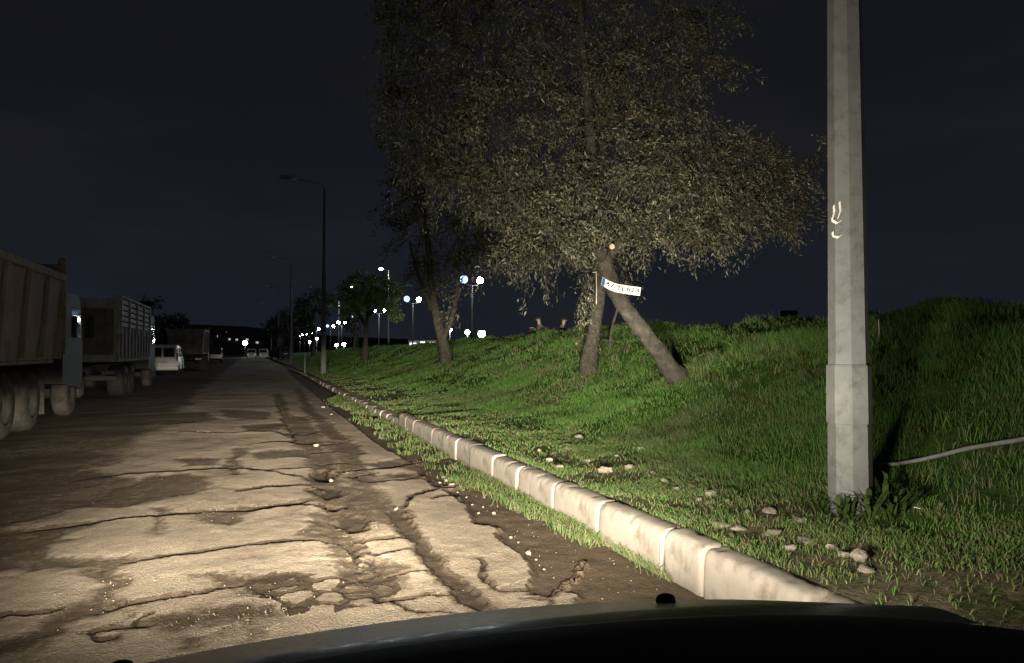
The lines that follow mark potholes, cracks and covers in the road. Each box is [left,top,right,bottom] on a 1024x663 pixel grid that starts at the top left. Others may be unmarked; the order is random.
crack [0,606,65,619]
pothole [309,469,340,483]
pothole [328,514,372,534]
crack [19,421,461,643]
pothole [305,486,347,501]
